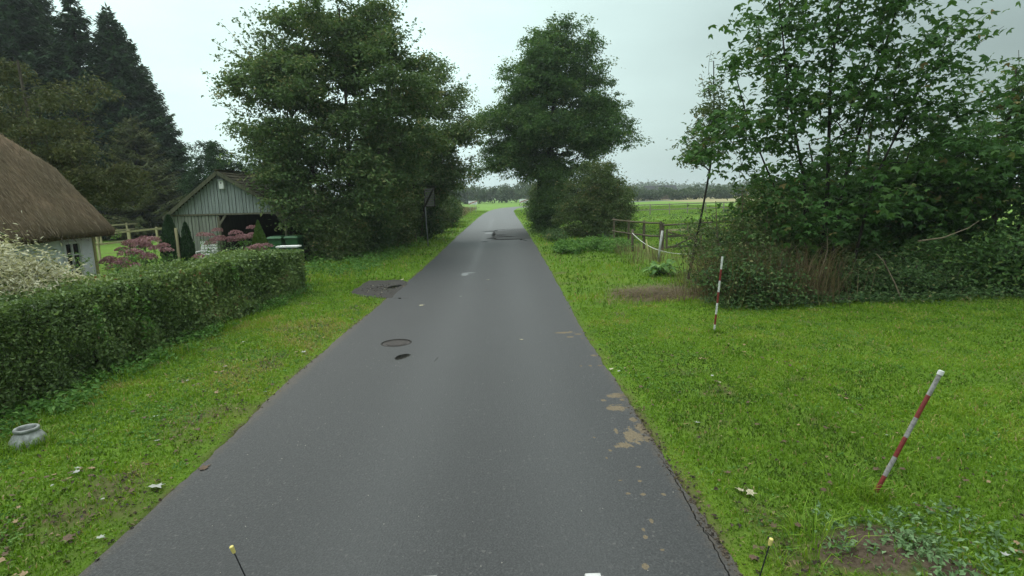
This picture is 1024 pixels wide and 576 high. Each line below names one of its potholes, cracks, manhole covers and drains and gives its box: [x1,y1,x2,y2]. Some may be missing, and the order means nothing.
manhole cover [381,339,412,347]
